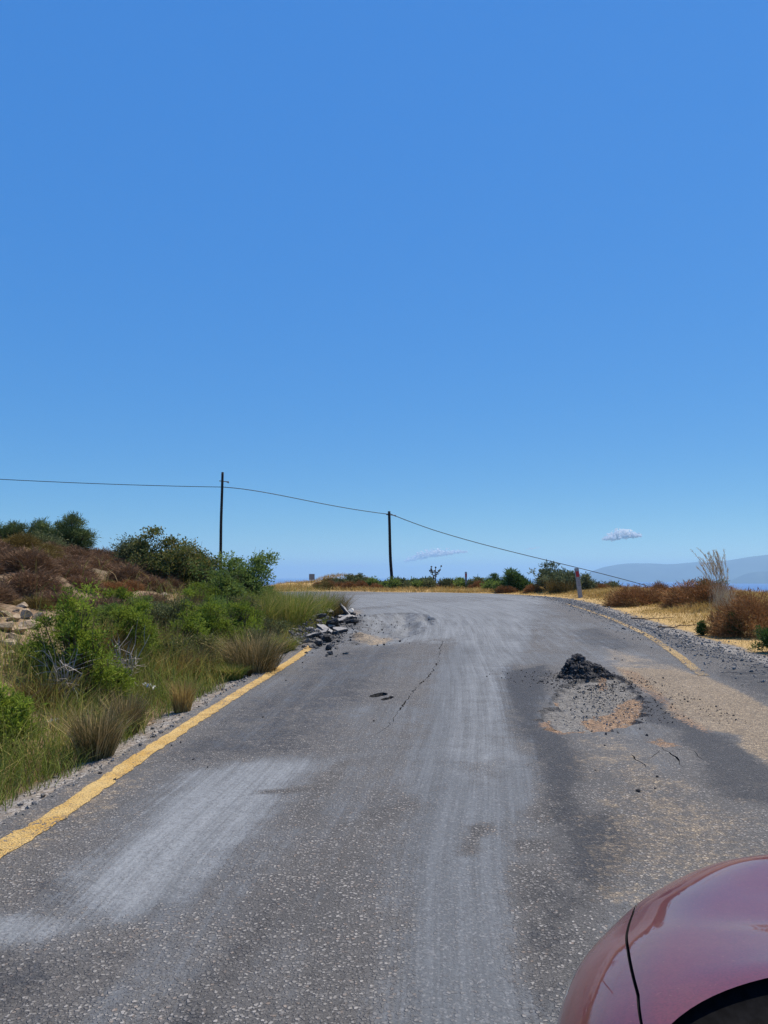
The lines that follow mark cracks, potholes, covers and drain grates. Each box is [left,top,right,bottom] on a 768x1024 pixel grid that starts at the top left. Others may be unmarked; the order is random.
crack [388,640,442,726]
crack [632,748,702,767]
pothole [348,612,436,645]
pothole [533,675,653,734]
